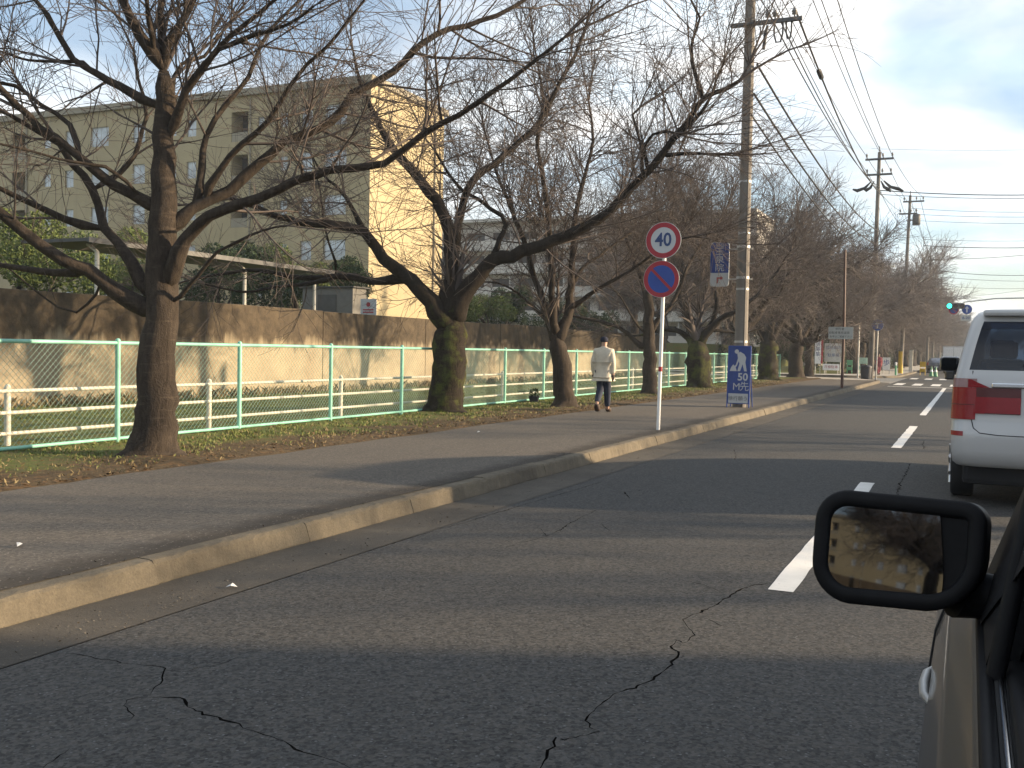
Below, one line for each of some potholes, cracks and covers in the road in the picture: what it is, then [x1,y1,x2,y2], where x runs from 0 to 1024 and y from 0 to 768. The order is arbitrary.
crack [540,582,772,768]
crack [73,653,350,768]
